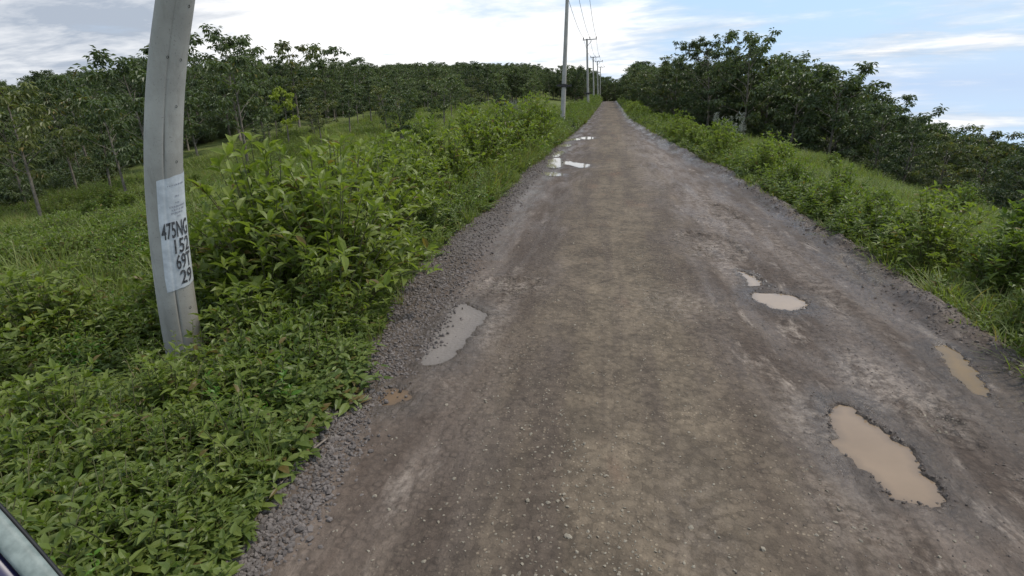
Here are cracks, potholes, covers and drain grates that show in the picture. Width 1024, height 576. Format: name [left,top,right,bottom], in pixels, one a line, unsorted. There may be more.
pothole [912,337,1020,408]
pothole [736,286,827,316]
pothole [402,298,503,374]
pothole [544,158,567,169]
pothole [803,392,984,527]
